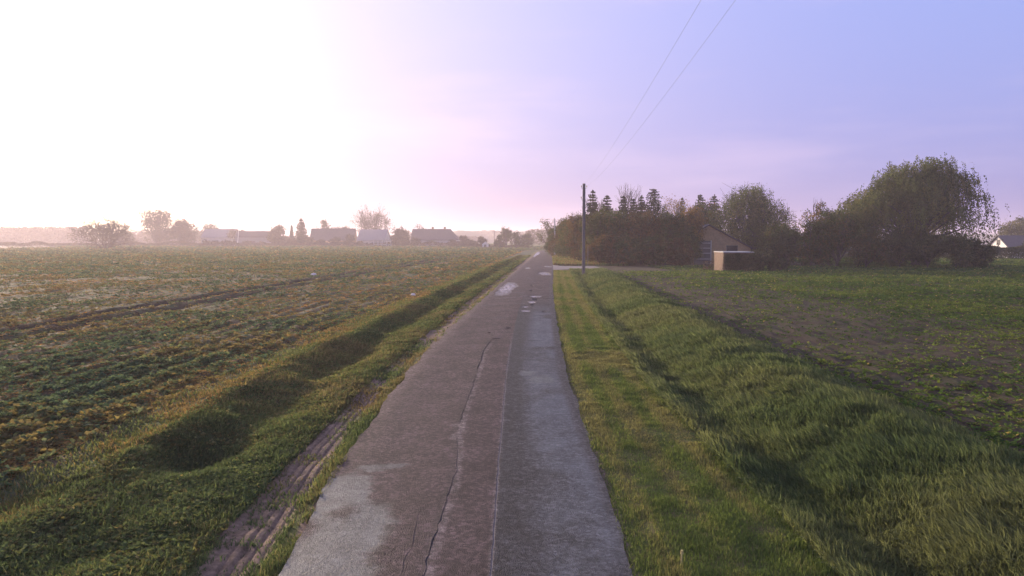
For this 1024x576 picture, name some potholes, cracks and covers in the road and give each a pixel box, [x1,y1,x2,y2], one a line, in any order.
crack [401,341,491,576]
